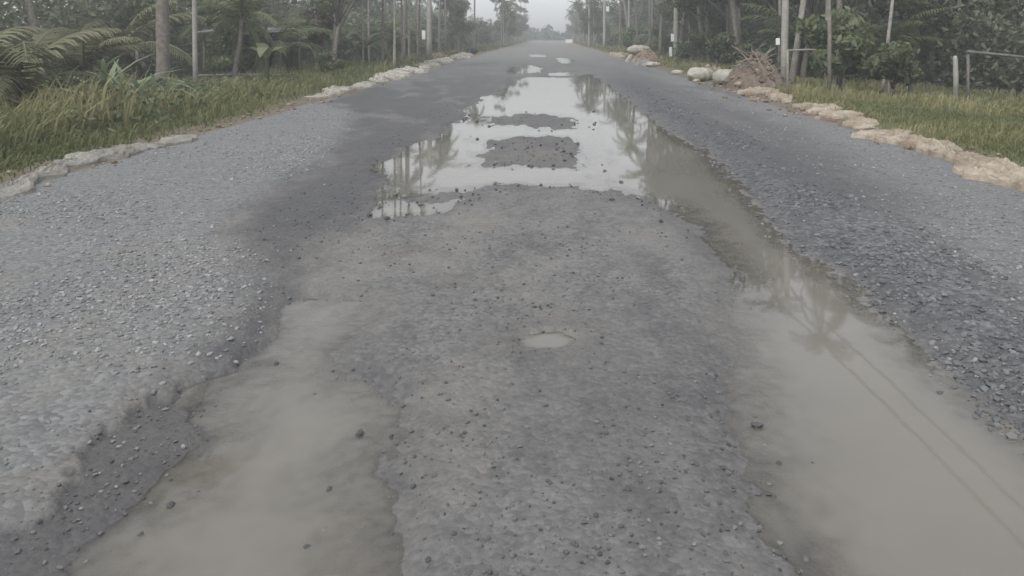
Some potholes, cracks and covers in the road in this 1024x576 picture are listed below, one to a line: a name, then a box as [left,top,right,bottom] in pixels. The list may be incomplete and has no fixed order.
pothole [0,282,467,576]
pothole [337,75,608,222]
pothole [499,64,550,74]
pothole [510,325,586,349]
